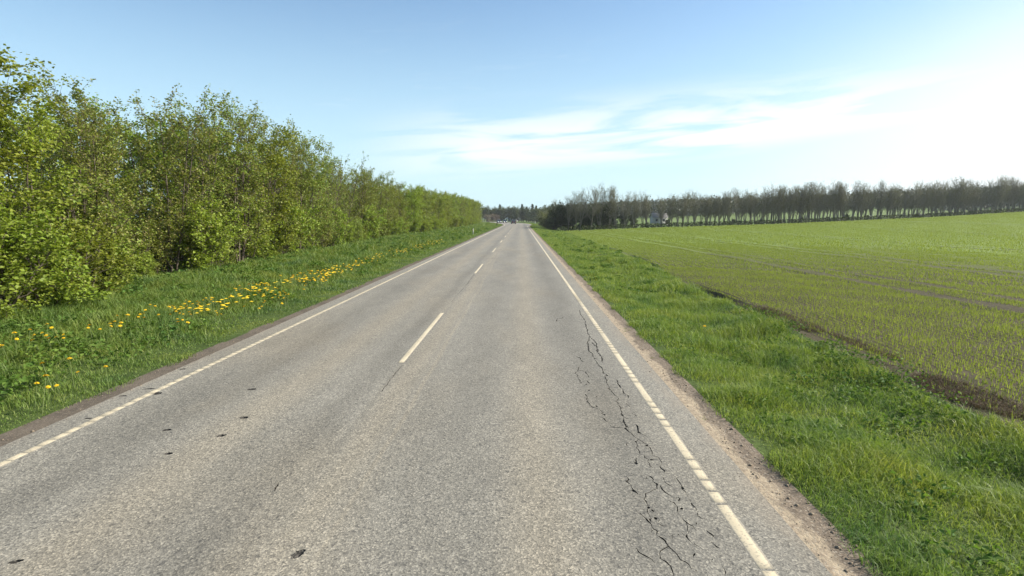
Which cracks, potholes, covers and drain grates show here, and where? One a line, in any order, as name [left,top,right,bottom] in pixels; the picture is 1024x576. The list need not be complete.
crack [556,310,726,575]
